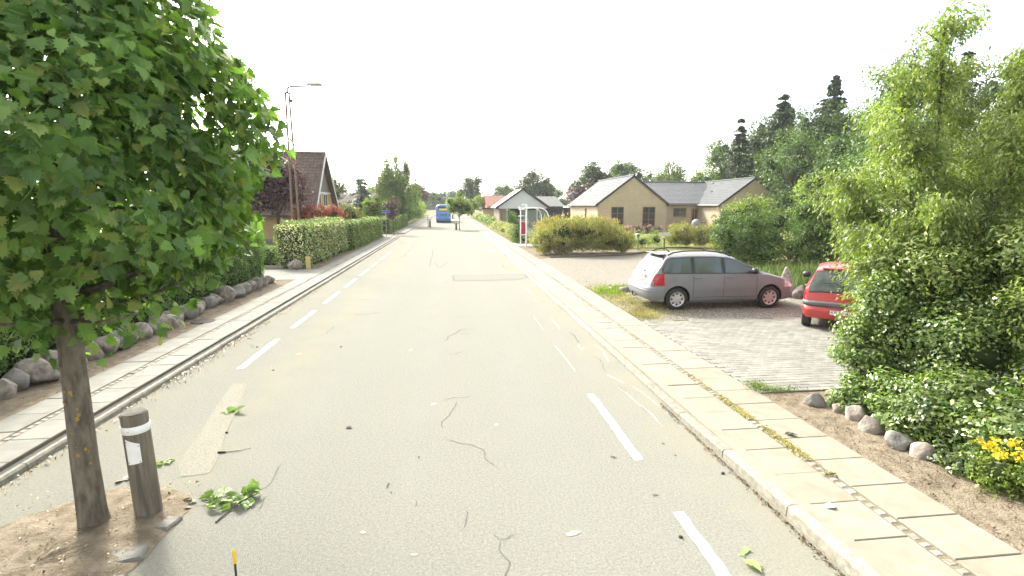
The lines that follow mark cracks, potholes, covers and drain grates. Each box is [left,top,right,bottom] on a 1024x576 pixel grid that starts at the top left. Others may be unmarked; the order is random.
crack [495,533,516,575]
crack [441,396,499,469]
